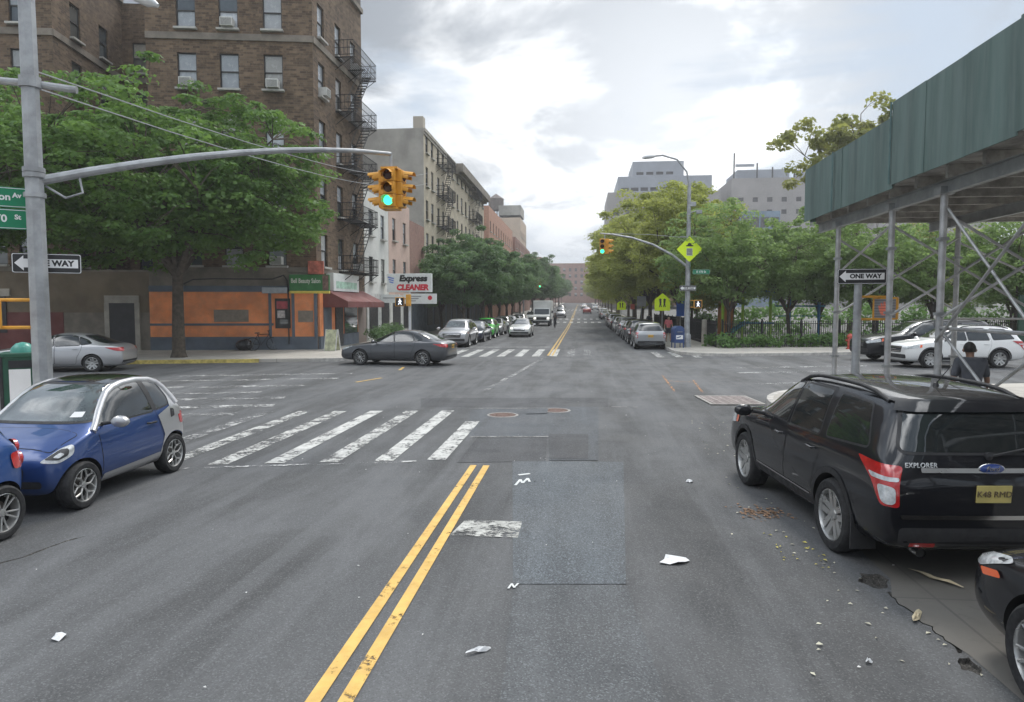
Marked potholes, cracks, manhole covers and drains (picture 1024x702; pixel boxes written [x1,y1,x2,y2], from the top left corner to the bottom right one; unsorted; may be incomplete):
pothole [958,657,982,675]
crack [0,536,84,564]
crack [888,592,963,653]
pothole [858,573,889,589]
